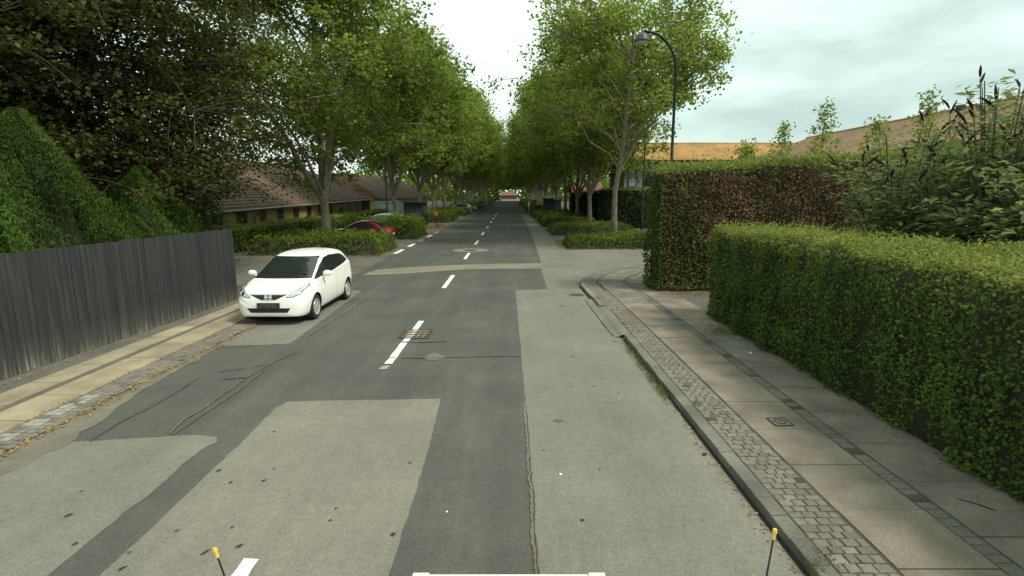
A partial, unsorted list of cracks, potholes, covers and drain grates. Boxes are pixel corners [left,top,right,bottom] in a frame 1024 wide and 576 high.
drain grate [398,329,433,339]
crack [89,379,197,442]
manhole cover [766,417,795,426]
